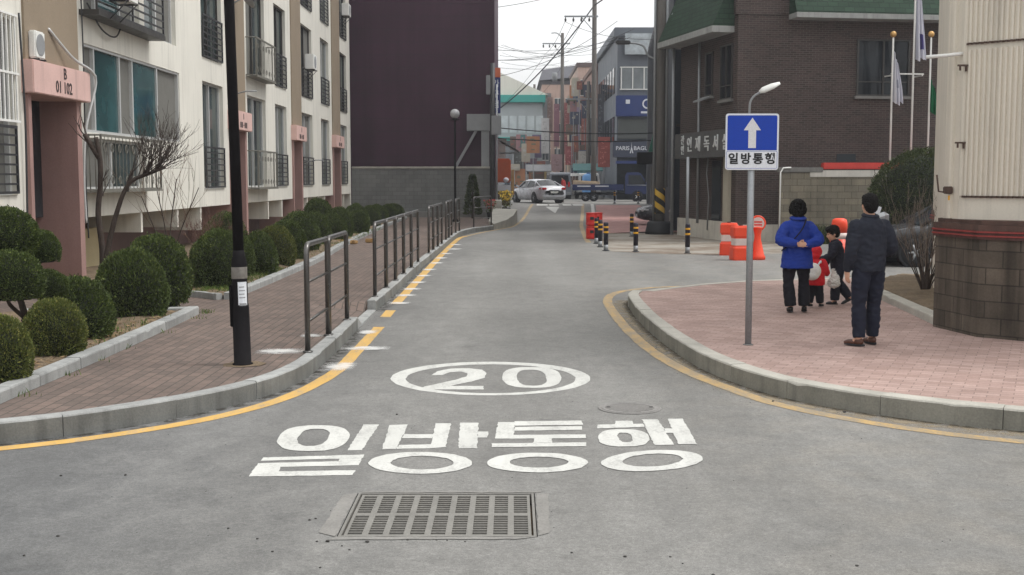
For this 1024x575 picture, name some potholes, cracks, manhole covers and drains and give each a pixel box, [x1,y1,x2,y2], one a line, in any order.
drain grate [319,491,551,540]
manhole cover [598,402,662,415]
